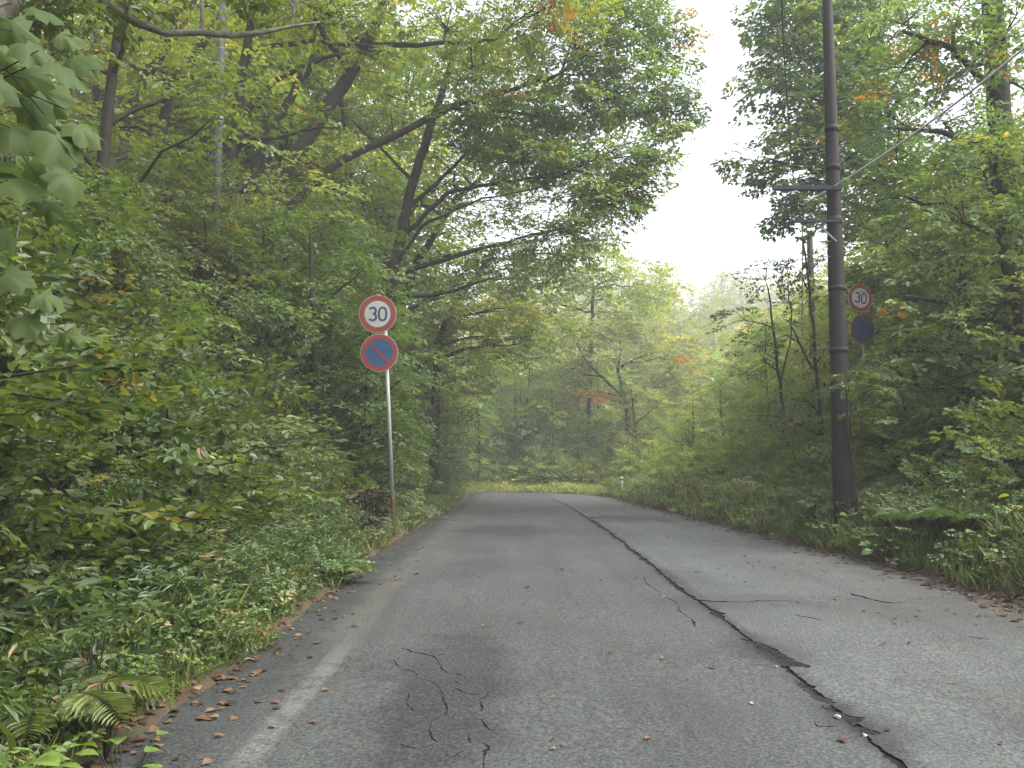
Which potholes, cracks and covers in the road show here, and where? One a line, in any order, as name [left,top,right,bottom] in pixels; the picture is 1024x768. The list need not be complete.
crack [394,648,493,768]
crack [551,499,908,768]
